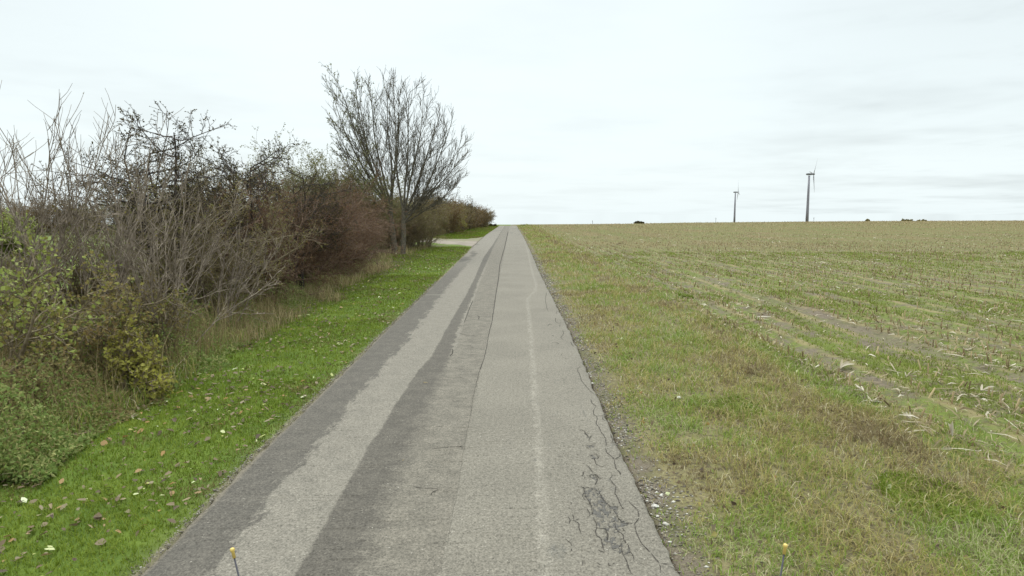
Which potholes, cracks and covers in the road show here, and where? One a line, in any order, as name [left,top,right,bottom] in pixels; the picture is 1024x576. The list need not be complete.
crack [545,292,666,573]
